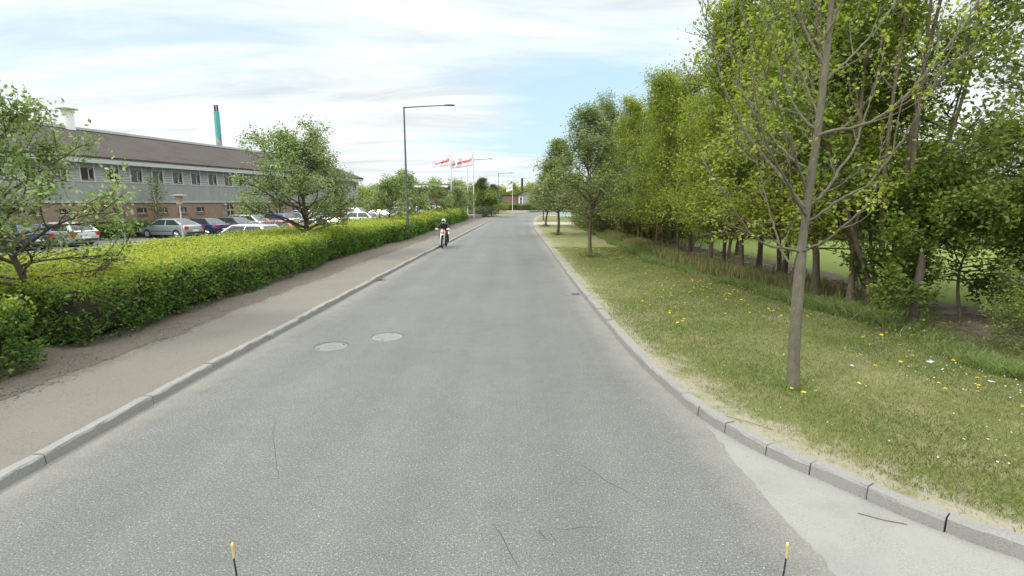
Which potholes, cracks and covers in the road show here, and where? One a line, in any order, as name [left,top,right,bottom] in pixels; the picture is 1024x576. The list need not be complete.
manhole cover [313,342,349,351]
manhole cover [371,333,404,341]
